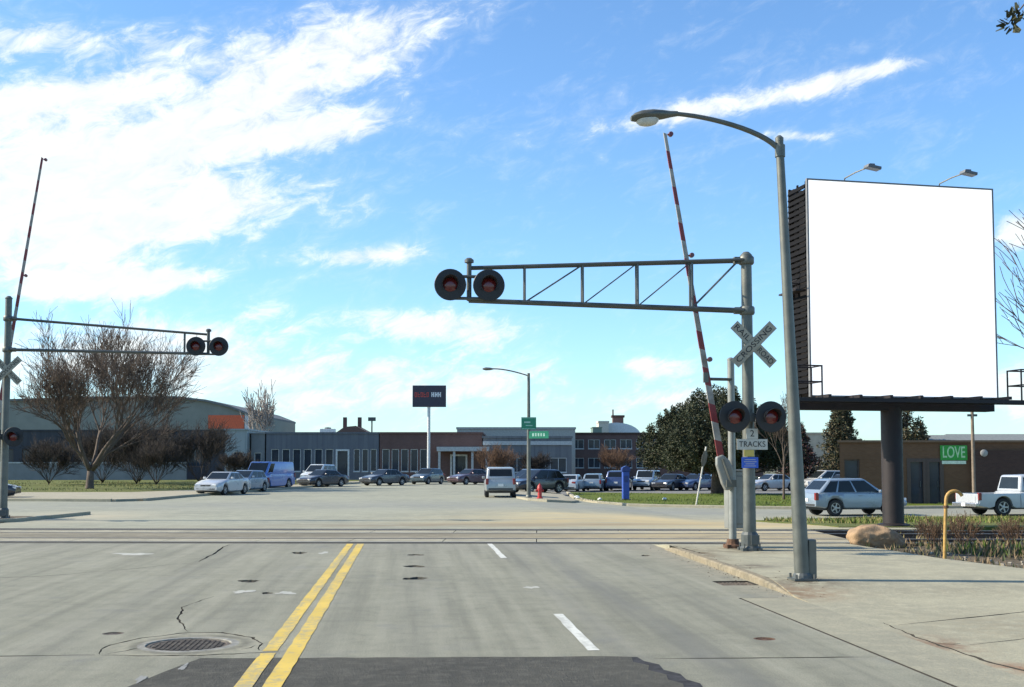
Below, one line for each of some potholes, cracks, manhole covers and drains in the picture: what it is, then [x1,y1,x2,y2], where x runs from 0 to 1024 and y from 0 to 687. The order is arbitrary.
manhole cover [137,637,239,652]
crack [99,597,268,656]
